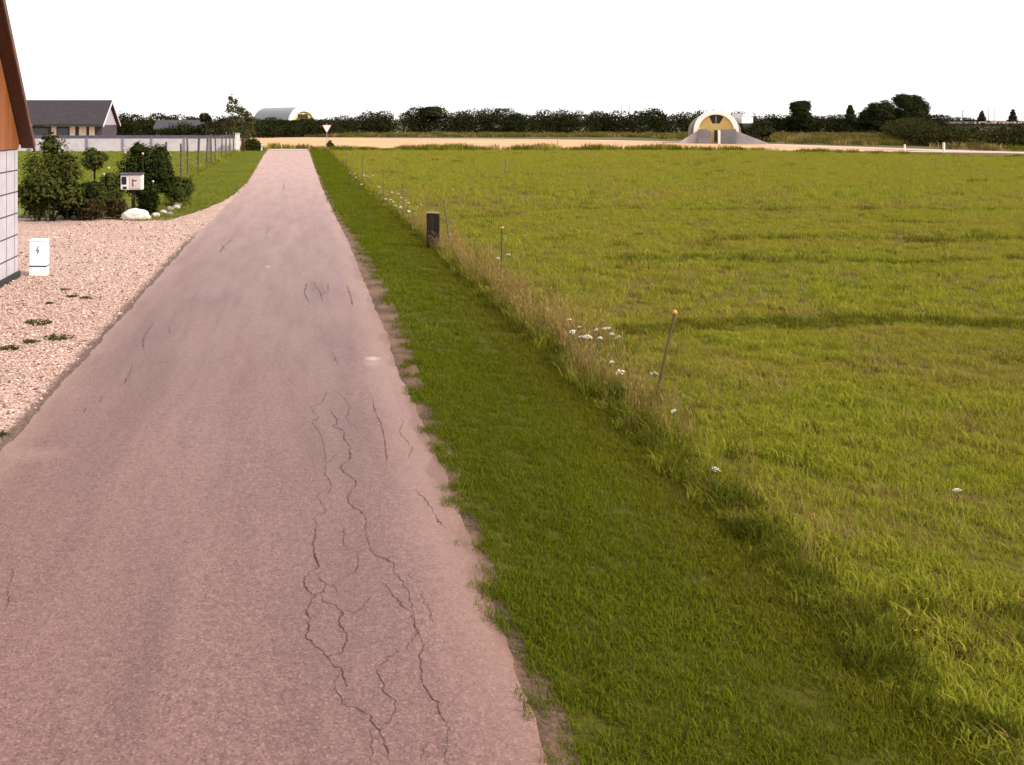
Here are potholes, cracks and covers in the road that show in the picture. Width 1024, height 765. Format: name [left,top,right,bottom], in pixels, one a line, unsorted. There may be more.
crack [303,393,451,762]
